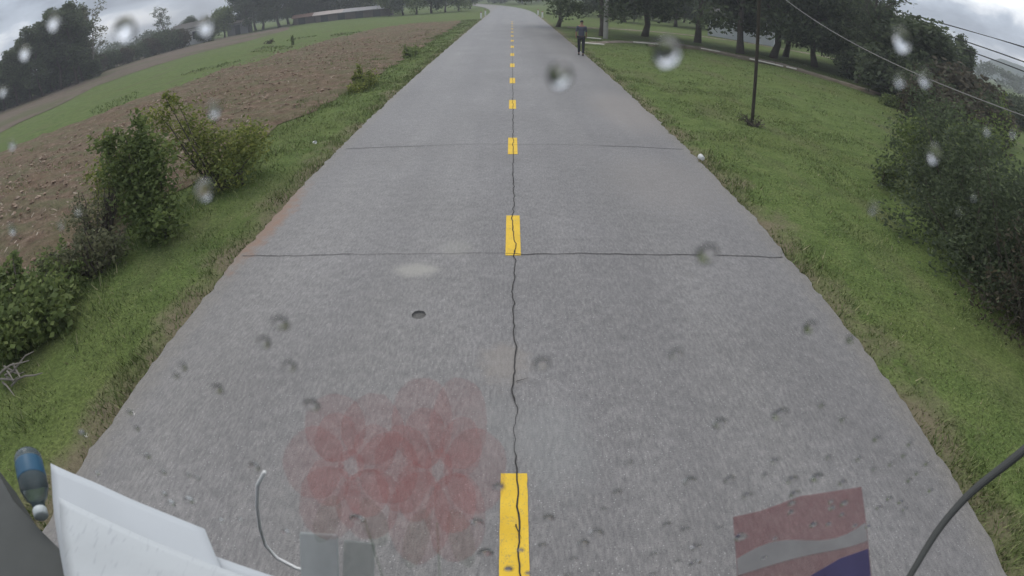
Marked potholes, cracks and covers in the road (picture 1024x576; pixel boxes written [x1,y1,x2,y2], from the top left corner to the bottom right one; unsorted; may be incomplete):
crack [242,44,777,576]
